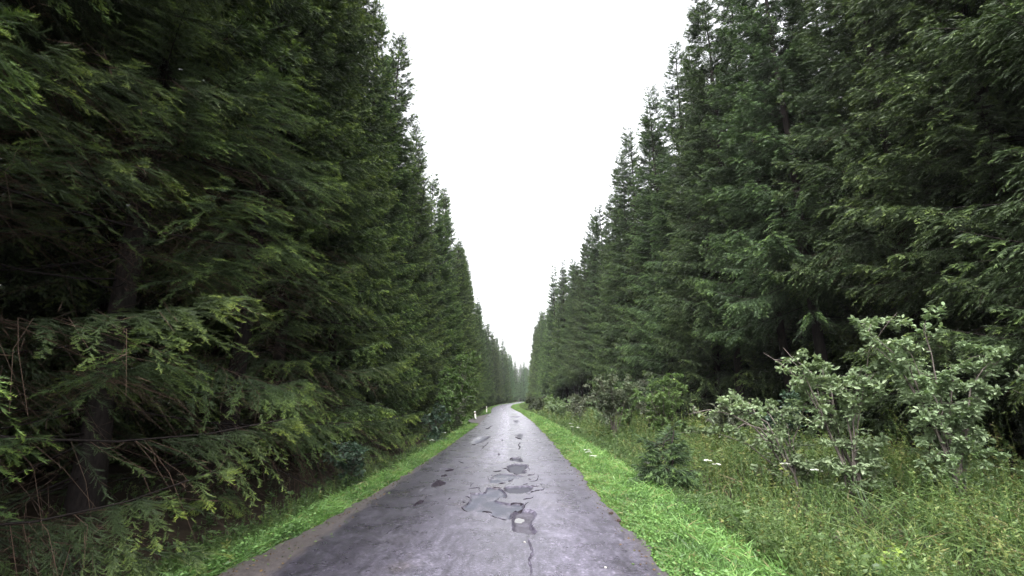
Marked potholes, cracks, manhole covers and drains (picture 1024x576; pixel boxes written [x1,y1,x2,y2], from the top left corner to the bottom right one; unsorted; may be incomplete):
crack [447,437,544,520]
pothole [470,436,491,444]
pothole [462,487,524,520]
pothole [511,509,538,535]
pothole [503,485,533,494]
pothole [507,463,528,474]
